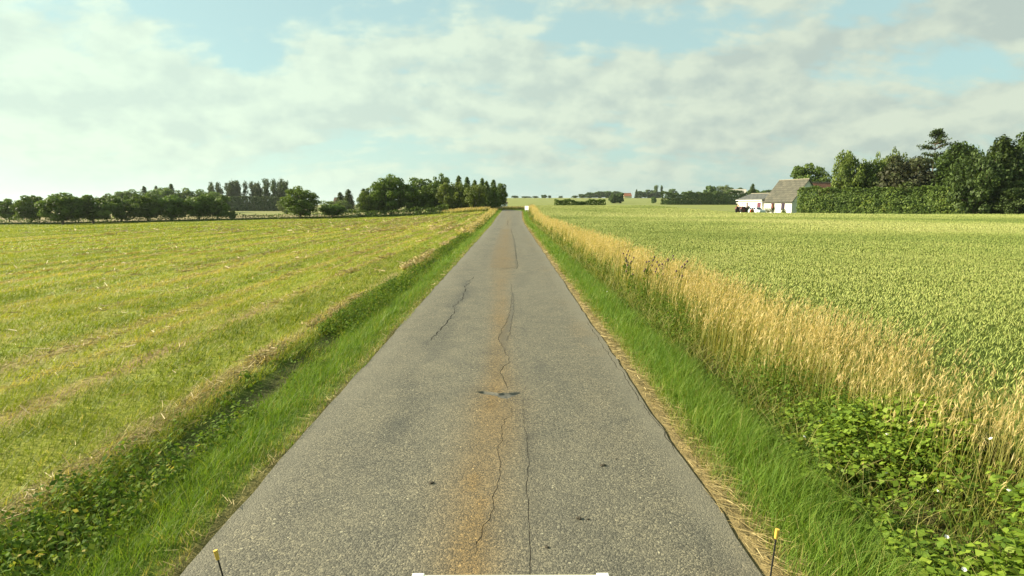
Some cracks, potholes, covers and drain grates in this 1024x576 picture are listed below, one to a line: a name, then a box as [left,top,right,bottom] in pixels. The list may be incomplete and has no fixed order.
crack [476,284,531,575]
pothole [478,391,521,399]
